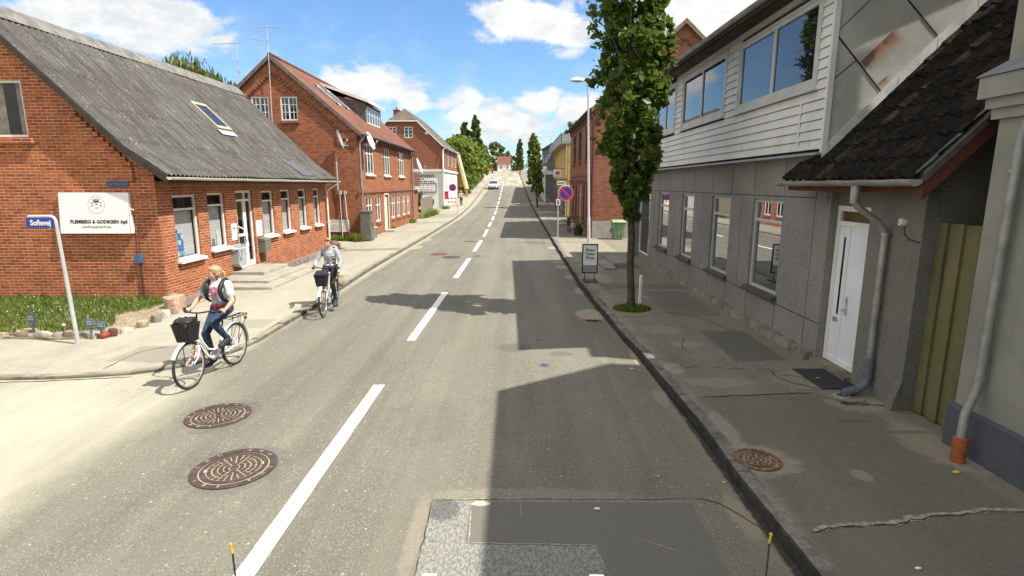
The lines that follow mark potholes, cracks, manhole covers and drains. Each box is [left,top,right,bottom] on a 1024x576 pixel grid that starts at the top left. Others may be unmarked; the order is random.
crack [811,507,1024,532]
manhole cover [188,448,278,490]
manhole cover [732,448,782,472]
manhole cover [183,403,252,429]
